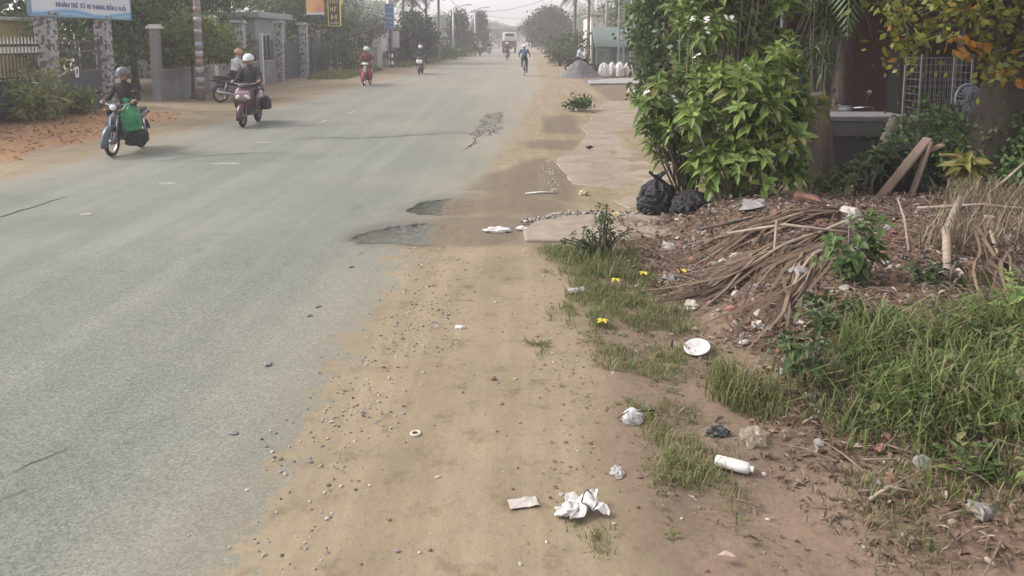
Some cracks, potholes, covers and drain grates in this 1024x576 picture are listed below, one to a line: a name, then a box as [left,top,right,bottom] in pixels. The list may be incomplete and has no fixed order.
pothole [347,223,472,246]
pothole [406,199,479,215]
crack [318,112,503,150]
